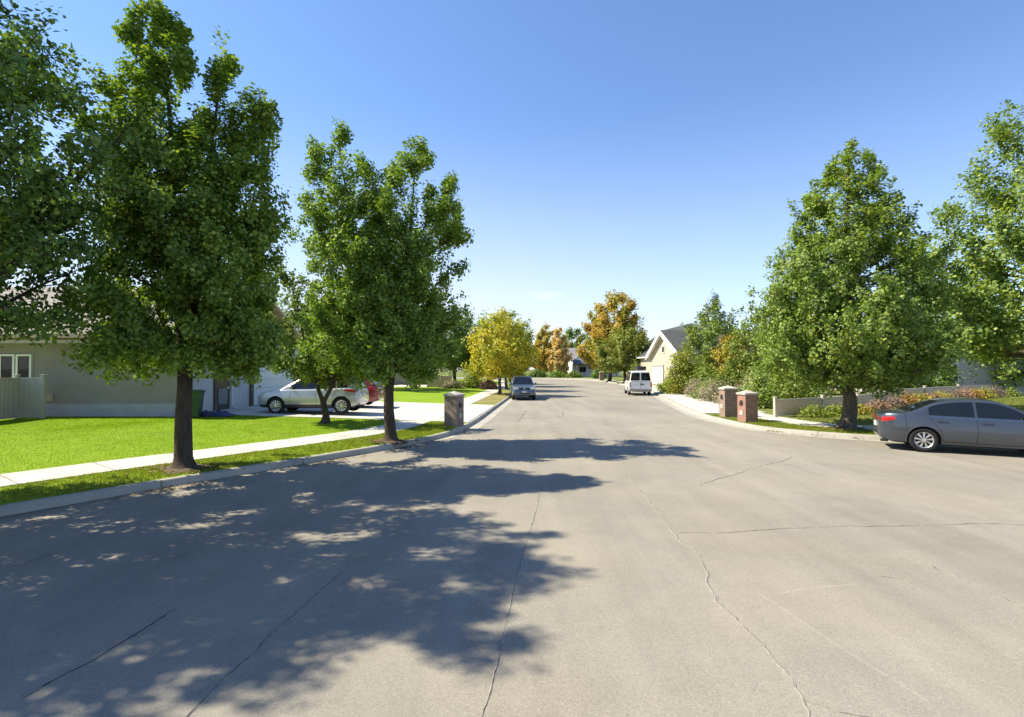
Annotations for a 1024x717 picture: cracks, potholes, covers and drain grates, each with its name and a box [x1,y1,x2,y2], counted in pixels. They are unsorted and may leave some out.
crack [628,457,1024,717]
